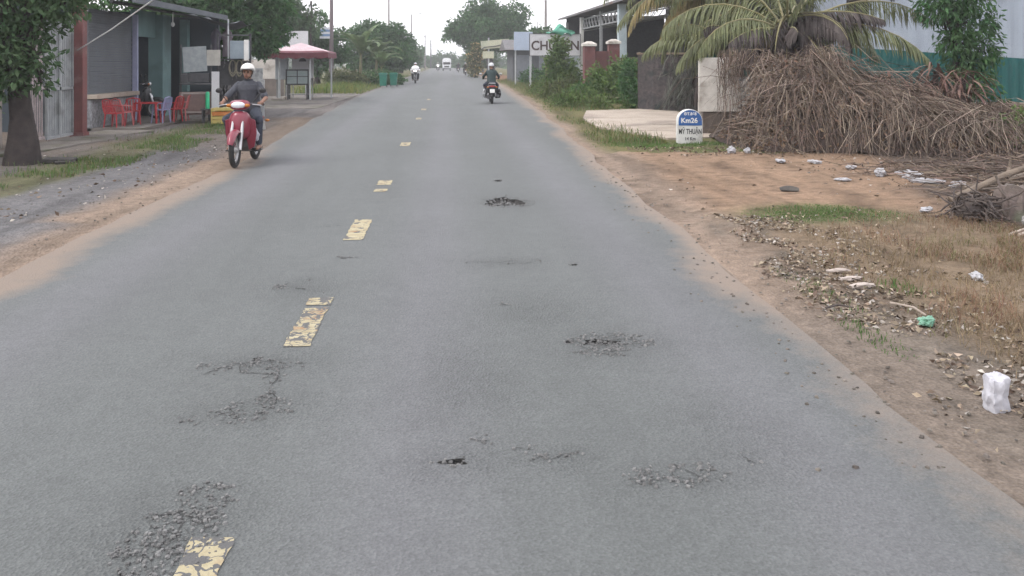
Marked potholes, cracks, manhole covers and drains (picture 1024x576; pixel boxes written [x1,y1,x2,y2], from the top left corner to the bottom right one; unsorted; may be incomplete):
crack [177,358,306,426]
pothole [429,456,467,467]
crack [512,444,585,463]
pothole [480,197,534,207]
pothole [575,337,624,346]
